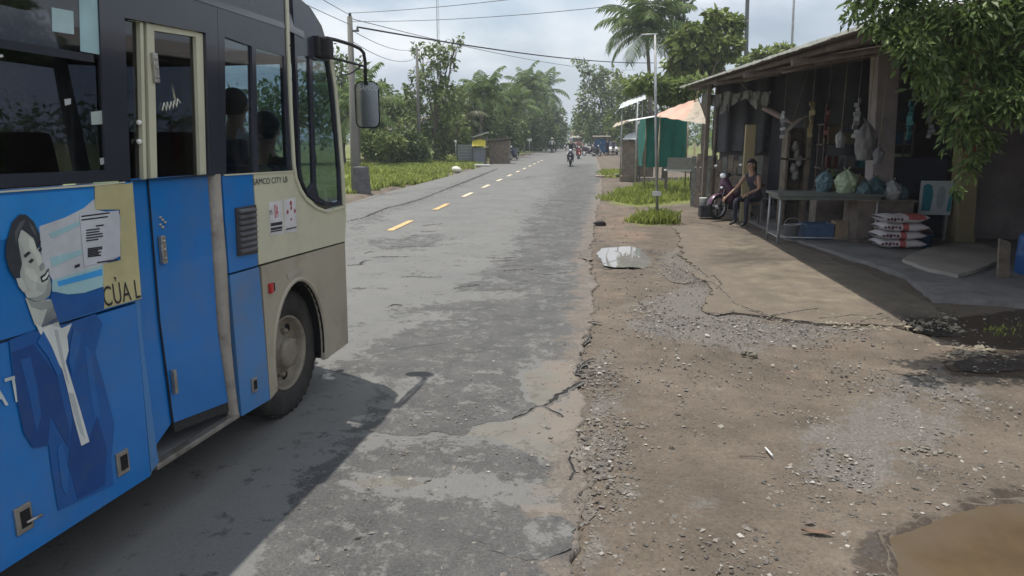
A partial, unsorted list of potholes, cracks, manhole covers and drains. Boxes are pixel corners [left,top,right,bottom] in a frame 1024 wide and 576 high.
pothole [877,497,1024,576]
pothole [595,246,654,270]
pothole [942,353,1024,373]
crack [699,270,899,322]
crack [567,450,576,480]
crack [512,321,602,419]
